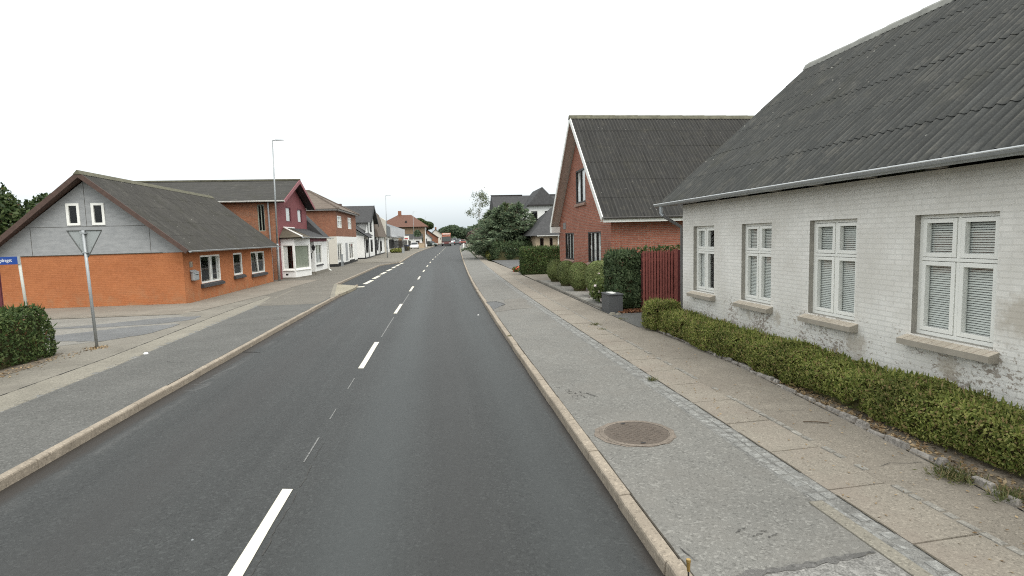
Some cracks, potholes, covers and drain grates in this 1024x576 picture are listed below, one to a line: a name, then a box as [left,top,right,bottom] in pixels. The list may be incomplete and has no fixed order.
manhole cover [594,420,676,447]
